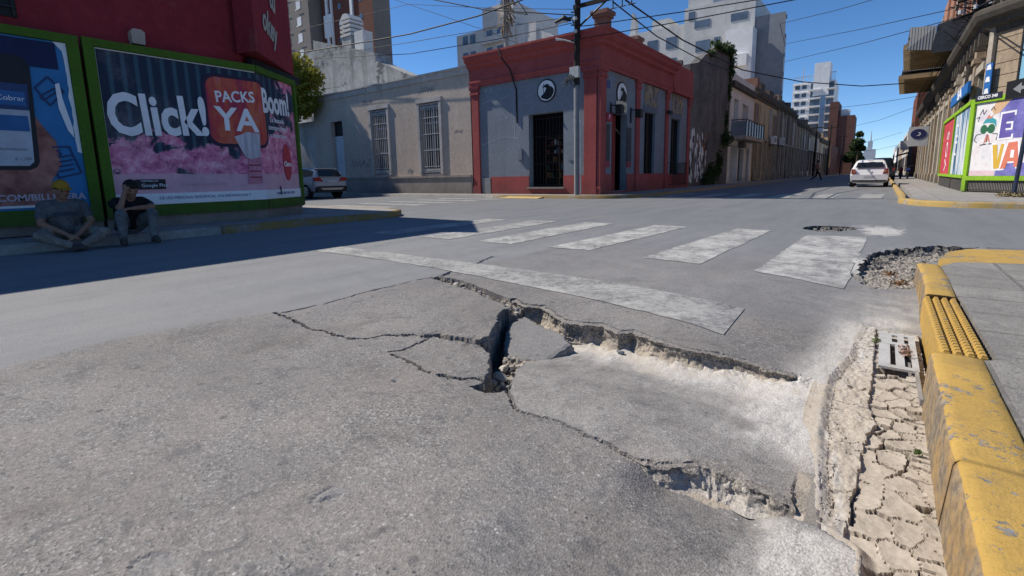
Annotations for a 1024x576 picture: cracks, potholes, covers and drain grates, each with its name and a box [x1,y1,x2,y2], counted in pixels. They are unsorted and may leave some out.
crack [504,383,654,463]
pothole [856,245,979,290]
crack [273,312,486,393]
drain grate [878,331,920,375]
